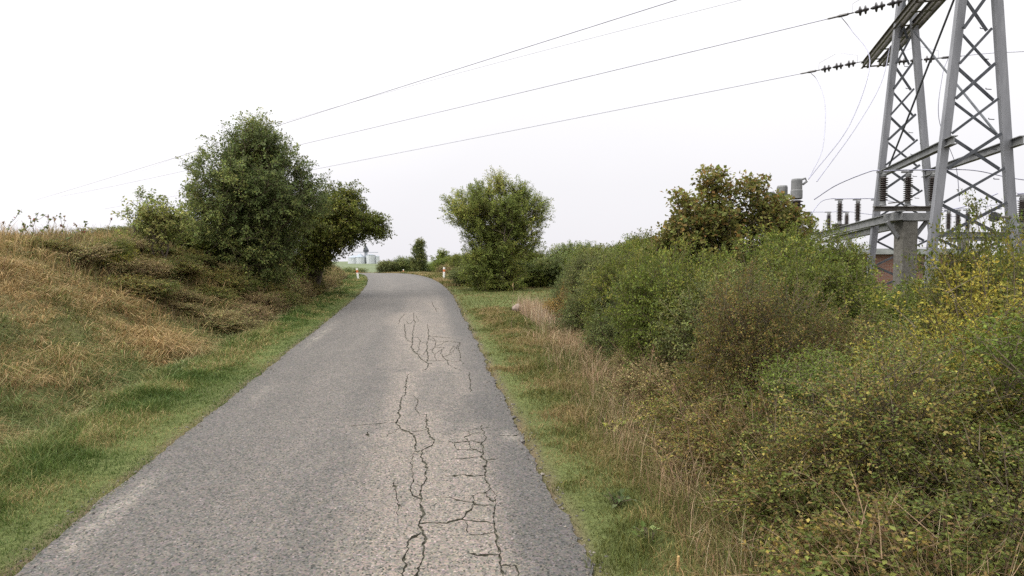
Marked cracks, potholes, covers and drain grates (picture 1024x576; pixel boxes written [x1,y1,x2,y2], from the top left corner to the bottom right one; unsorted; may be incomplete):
crack [353,303,520,576]
